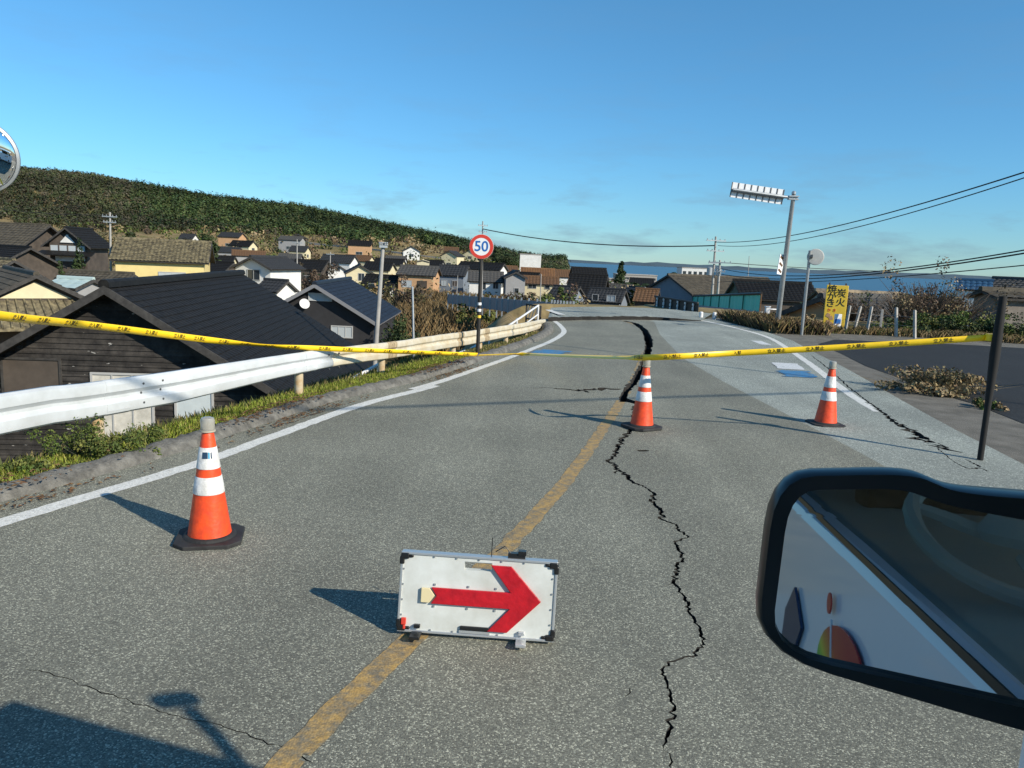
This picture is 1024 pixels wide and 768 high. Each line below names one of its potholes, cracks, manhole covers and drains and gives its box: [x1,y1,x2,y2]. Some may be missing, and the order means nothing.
crack [34,670,313,763]
crack [813,357,987,471]
crack [554,321,706,768]
